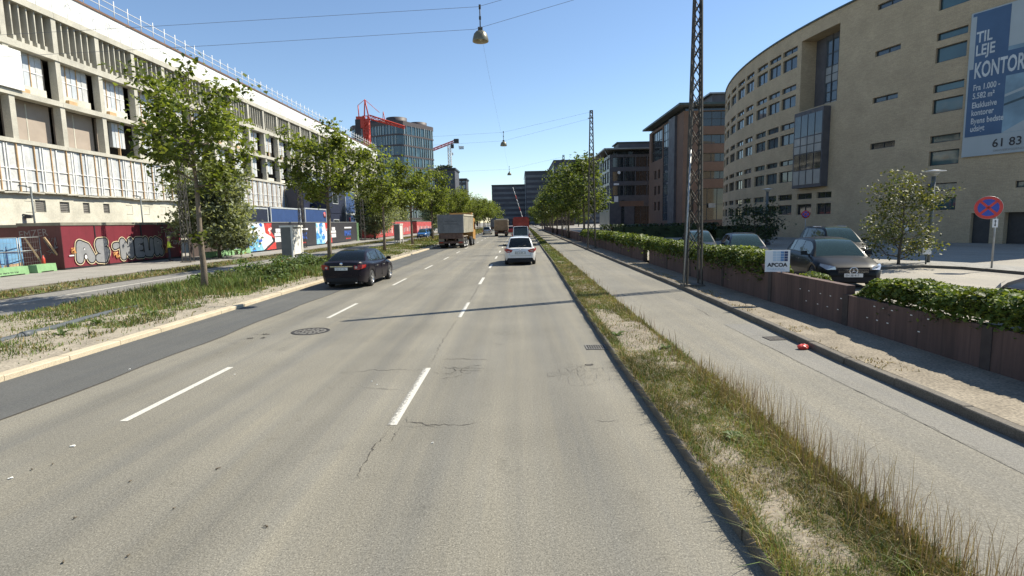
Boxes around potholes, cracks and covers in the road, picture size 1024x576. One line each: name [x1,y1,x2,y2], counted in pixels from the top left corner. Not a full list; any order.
crack [357,419,472,475]
